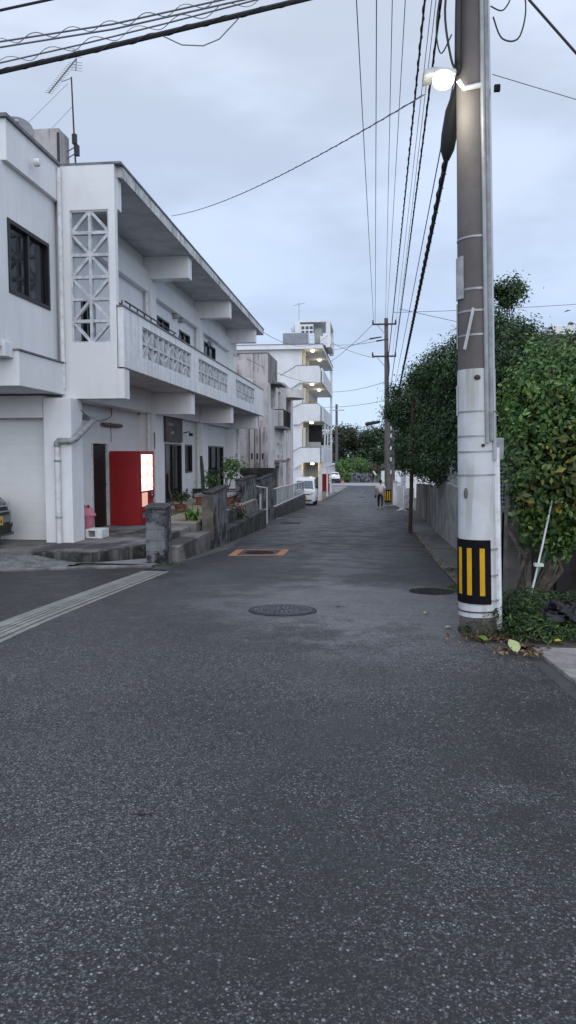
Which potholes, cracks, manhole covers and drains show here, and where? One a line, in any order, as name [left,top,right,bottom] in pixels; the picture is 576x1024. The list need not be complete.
manhole cover [248,604,317,616]
